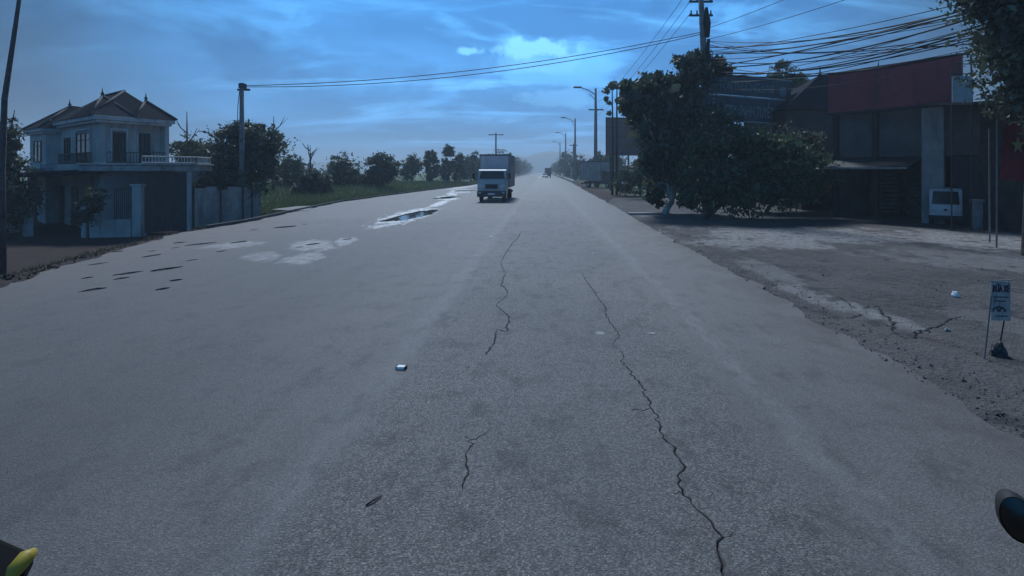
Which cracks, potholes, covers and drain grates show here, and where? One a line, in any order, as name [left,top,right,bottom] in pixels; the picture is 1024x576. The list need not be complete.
pothole [379,209,438,222]
crack [466,234,520,369]
crack [839,281,994,364]
crack [462,430,489,492]
crack [582,274,733,576]
